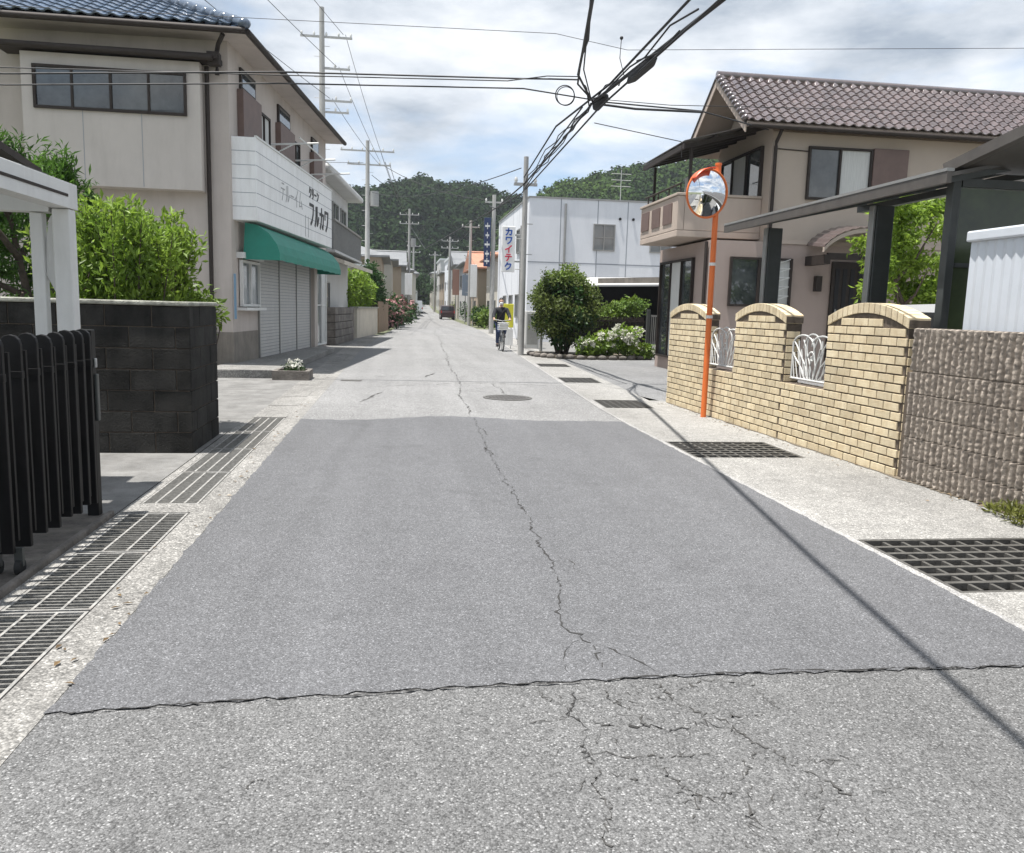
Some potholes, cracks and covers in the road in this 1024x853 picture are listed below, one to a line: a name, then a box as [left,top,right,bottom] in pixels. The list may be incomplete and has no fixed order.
drain grate [213,431,271,449]
drain grate [236,418,285,432]
drain grate [594,400,652,408]
drain grate [77,513,189,553]
crack [360,365,545,402]
drain grate [183,449,254,473]
drain grate [667,442,804,458]
crack [443,350,659,677]
drain grate [141,472,230,504]
drain grate [858,538,1024,593]
drain grate [0,611,89,700]
crack [527,679,989,853]
